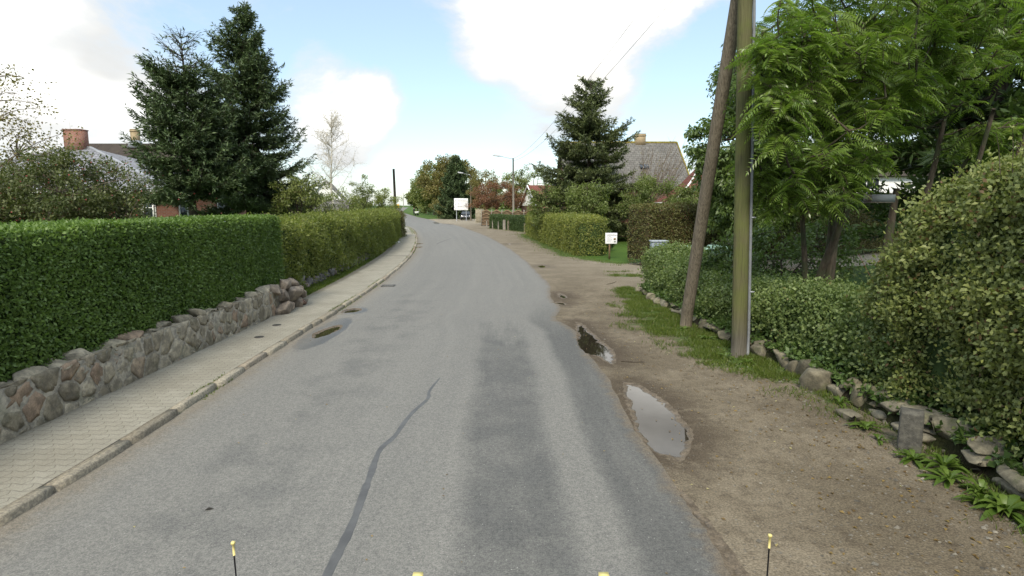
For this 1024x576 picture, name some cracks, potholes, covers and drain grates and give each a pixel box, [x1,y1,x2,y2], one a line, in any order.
pothole [622,381,694,462]
pothole [312,325,342,338]
pothole [575,322,616,364]
